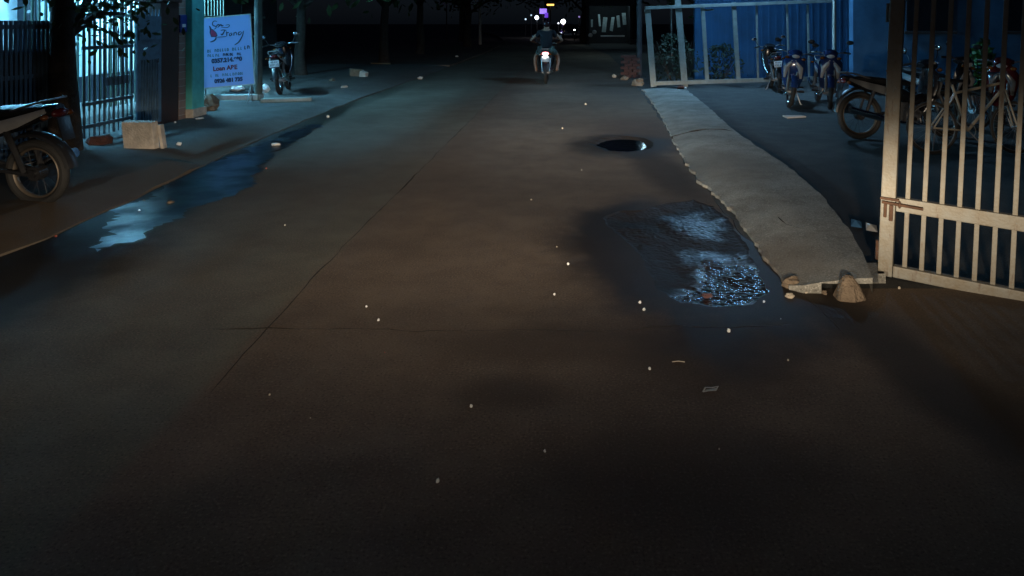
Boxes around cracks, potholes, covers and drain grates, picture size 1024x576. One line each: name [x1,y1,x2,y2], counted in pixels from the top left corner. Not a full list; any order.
pothole [603,199,770,307]
pothole [588,136,653,152]
